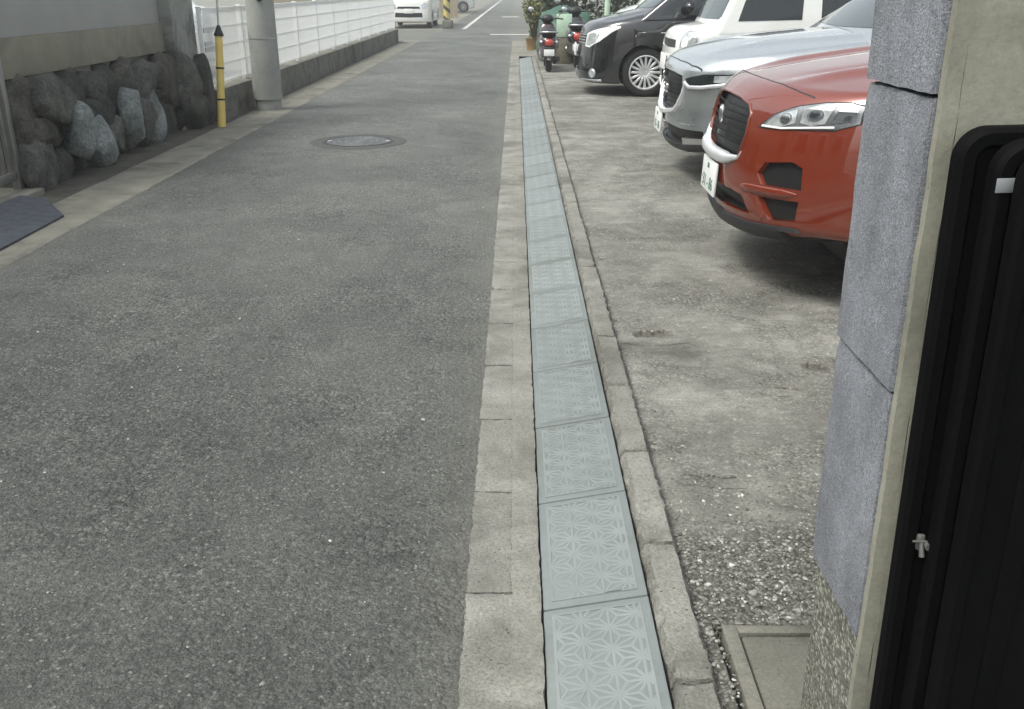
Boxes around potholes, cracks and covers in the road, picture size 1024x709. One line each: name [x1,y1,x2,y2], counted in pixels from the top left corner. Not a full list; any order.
manhole cover [310,134,407,149]
utility cover [721,625,811,709]
pothole [614,322,700,346]
